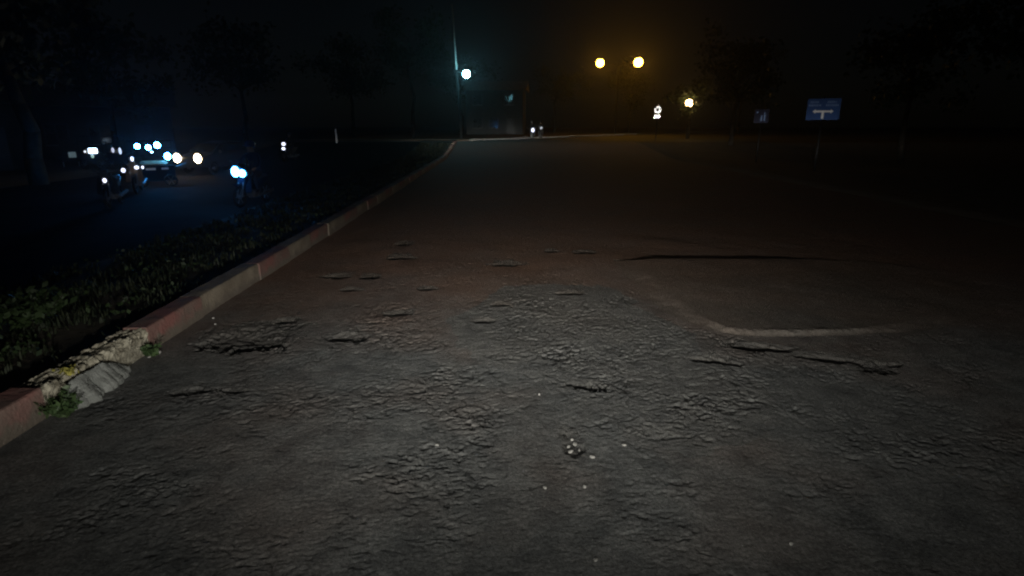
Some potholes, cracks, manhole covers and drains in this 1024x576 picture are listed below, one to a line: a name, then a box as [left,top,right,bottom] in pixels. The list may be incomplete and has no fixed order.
pothole [319,271,356,280]
pothole [381,308,416,317]
pothole [684,351,747,368]
pothole [386,252,417,260]
pothole [710,339,810,353]
pothole [784,350,852,365]
pothole [321,326,375,344]
pothole [164,312,319,358]
pothole [359,272,382,280]
pothole [485,259,529,268]
pothole [557,375,617,392]
